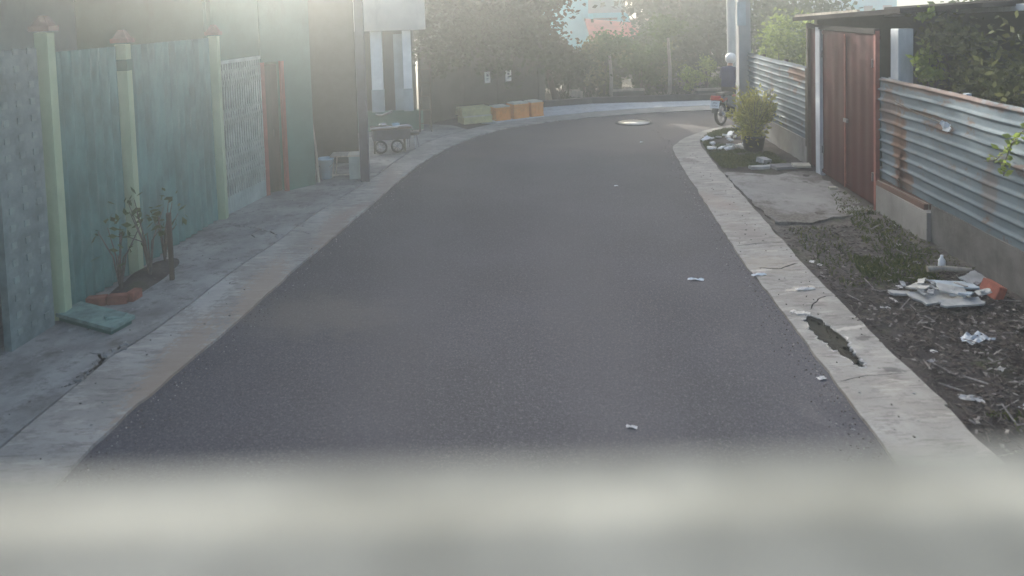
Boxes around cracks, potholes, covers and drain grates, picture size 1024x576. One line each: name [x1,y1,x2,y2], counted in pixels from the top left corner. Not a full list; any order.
crack [61,341,129,388]
pothole [789,309,867,368]
